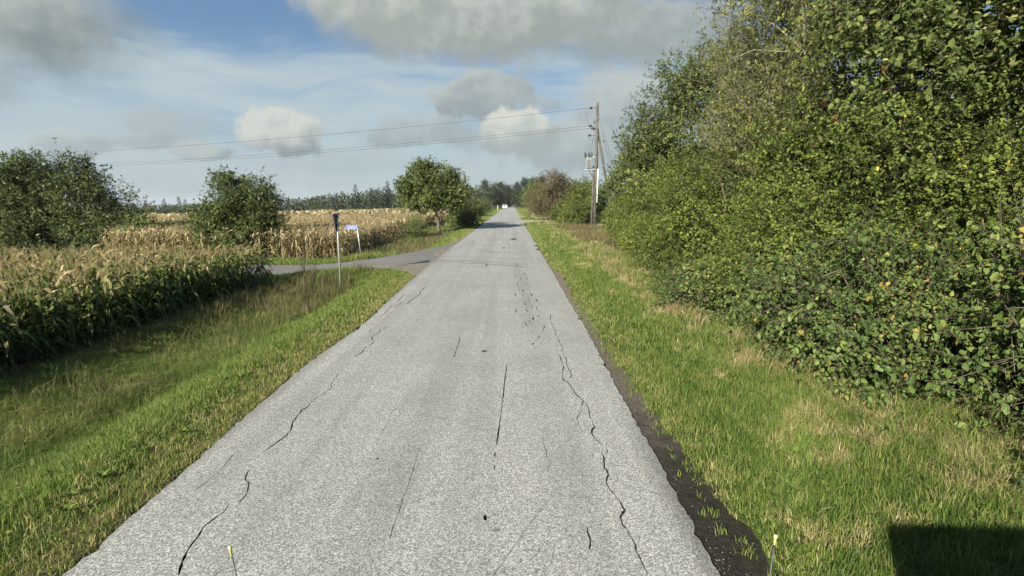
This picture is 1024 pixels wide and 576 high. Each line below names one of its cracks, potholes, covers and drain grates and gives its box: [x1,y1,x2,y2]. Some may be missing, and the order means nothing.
crack [490,364,507,486]
crack [178,455,251,576]
crack [265,376,337,451]
crack [514,263,648,575]
crack [355,288,424,357]
